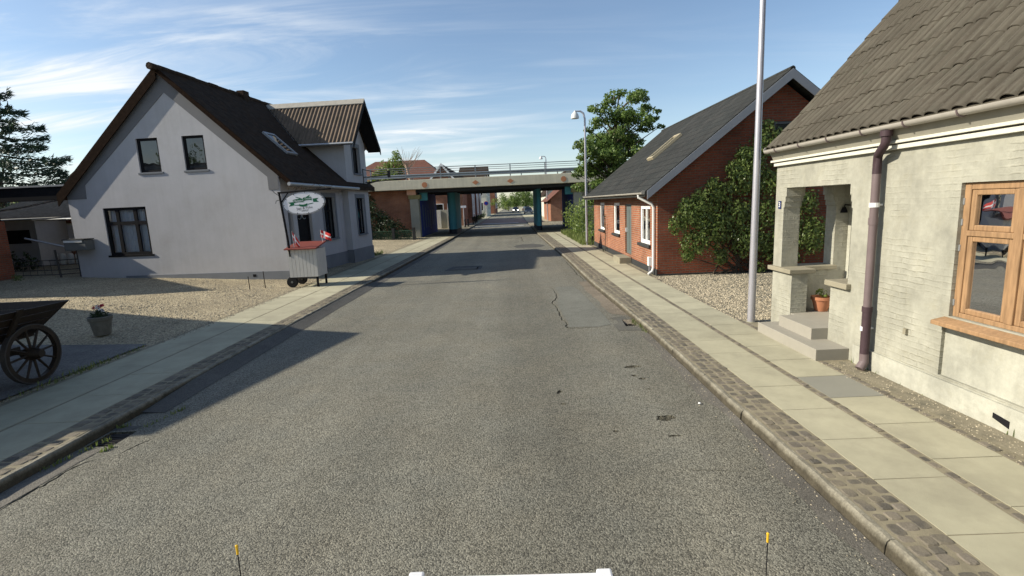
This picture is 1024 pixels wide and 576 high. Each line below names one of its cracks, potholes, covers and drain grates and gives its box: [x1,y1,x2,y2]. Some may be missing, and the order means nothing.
crack [552,262,600,329]
drain grate [87,431,137,447]
